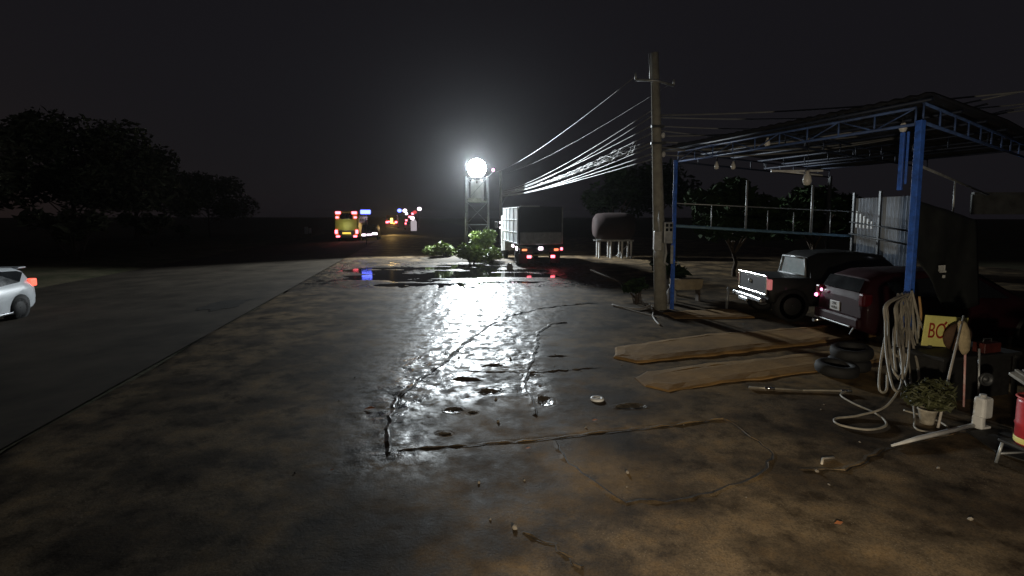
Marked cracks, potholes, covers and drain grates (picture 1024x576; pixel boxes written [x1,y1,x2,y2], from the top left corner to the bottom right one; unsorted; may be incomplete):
crack [384,303,778,506]
pothole [445,375,489,384]
pothole [441,406,467,414]
pothole [535,395,557,408]
pothole [477,387,503,395]
pothole [609,402,652,410]
crack [522,530,583,569]
